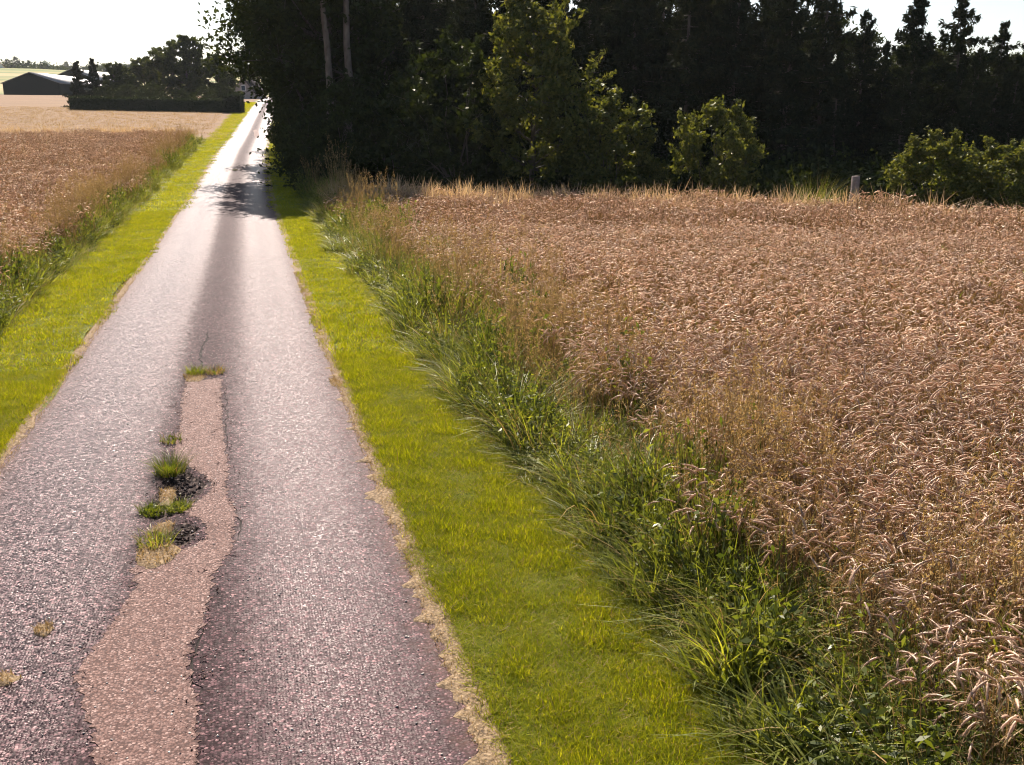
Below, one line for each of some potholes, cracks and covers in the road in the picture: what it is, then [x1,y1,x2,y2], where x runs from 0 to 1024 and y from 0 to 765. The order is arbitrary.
pothole [141,469,208,521]
pothole [171,523,201,547]
crack [198,333,209,367]
